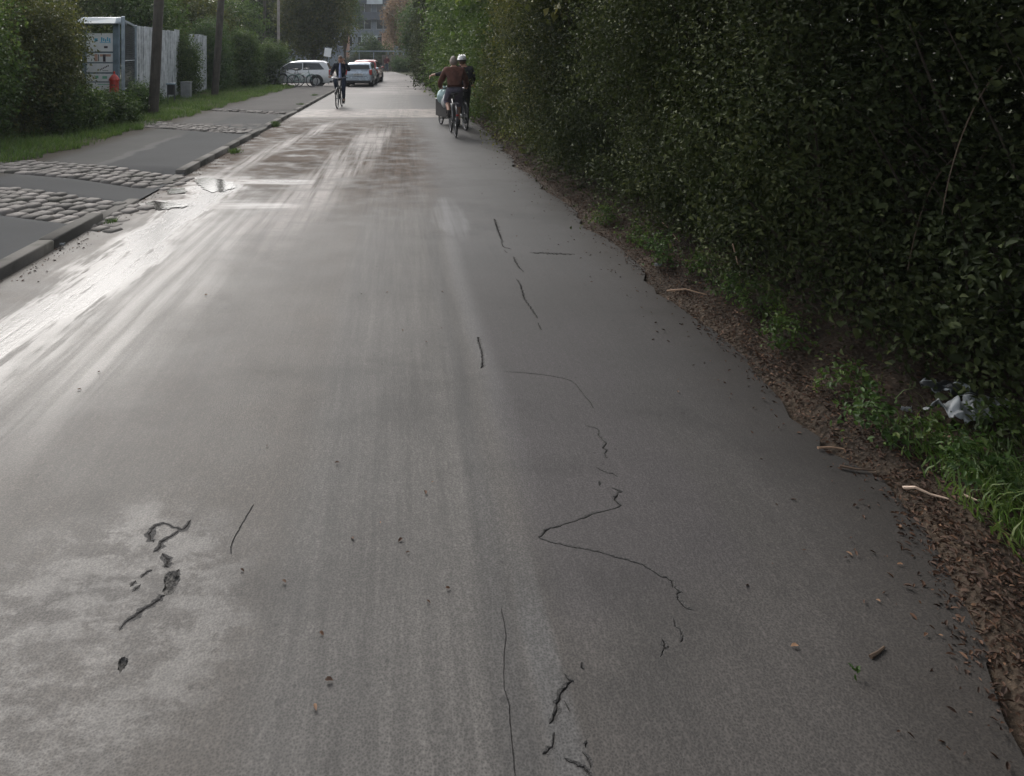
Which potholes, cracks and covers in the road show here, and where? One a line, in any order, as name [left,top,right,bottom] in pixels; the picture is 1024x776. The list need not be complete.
crack [501,608,516,776]
crack [477,337,486,368]
crack [542,662,593,776]
crack [519,372,694,657]
crack [494,219,574,330]
crack [230,504,254,555]
crack [119,520,191,631]
